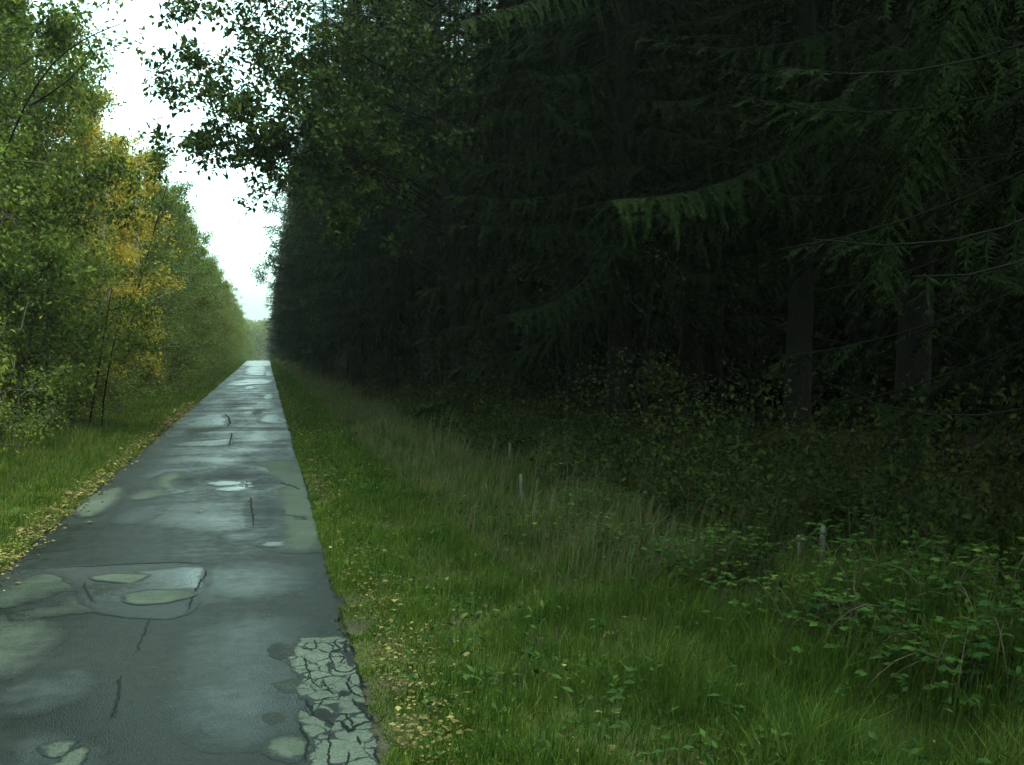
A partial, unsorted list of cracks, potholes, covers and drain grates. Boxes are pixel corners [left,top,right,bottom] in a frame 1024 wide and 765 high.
crack [299,639,383,765]
crack [109,674,122,718]
pothole [43,562,213,620]
